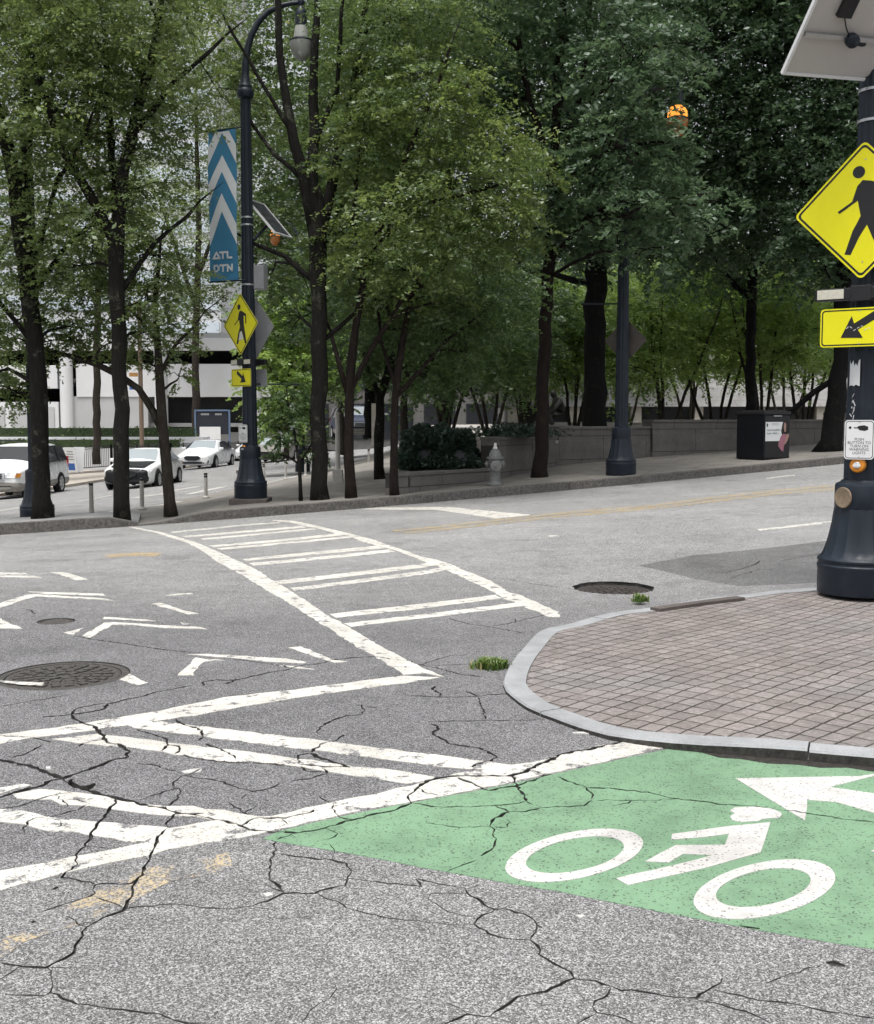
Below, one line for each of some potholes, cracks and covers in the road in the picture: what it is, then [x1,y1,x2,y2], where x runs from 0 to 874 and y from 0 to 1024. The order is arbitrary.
crack [0,636,874,1024]
manhole cover [572,582,654,595]
manhole cover [0,662,130,690]
